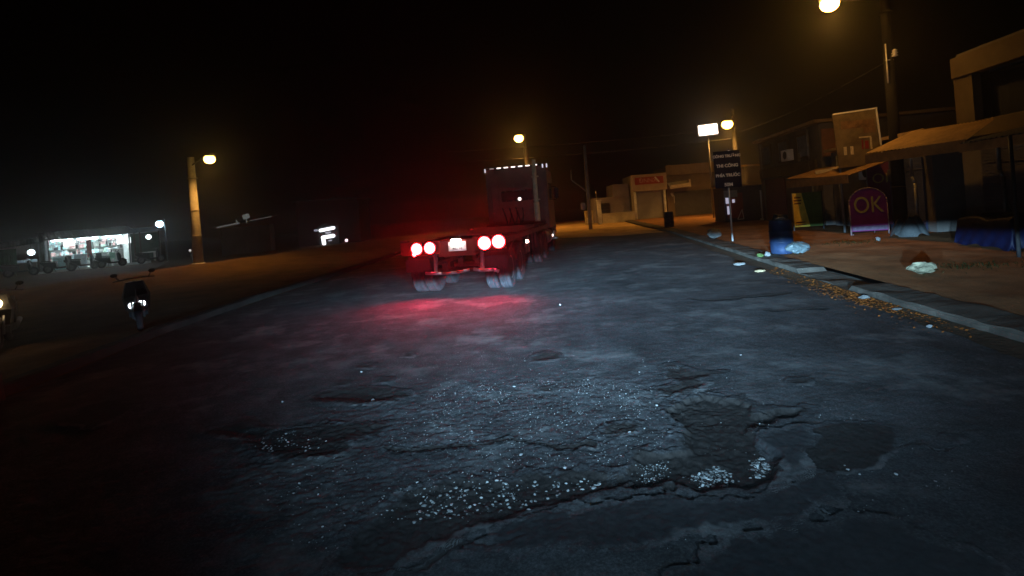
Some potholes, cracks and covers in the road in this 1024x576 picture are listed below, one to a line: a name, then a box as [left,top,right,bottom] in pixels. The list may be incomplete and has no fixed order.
pothole [784,376,816,386]
pothole [604,391,823,498]
pothole [524,351,564,364]
crack [380,435,600,454]
crack [352,537,474,576]
pothole [805,420,906,475]
pothole [236,419,395,465]
pothole [296,385,417,407]
